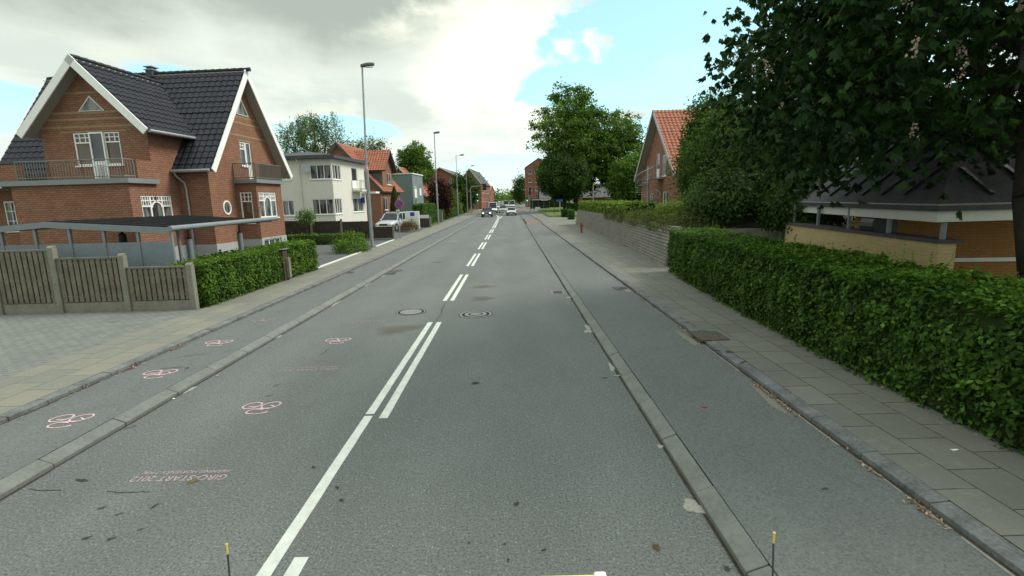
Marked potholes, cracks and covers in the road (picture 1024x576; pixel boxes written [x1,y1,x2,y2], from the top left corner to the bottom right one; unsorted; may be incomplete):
utility cover [690,331,731,342]
manhole cover [458,310,493,318]
